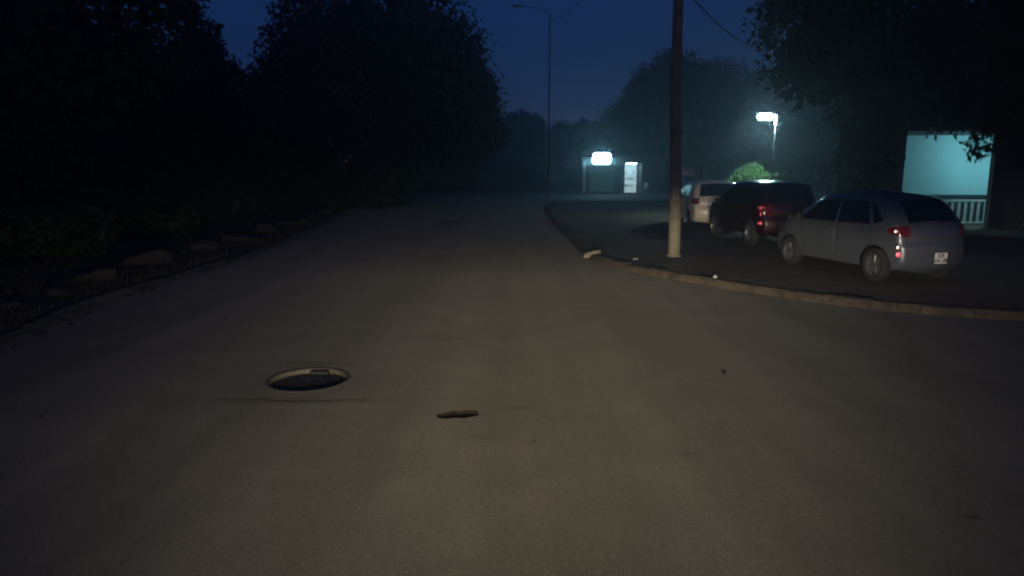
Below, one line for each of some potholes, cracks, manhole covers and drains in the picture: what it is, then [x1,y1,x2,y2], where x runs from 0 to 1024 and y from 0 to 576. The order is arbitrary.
manhole cover [265,368,351,393]
pothole [436,410,479,419]
